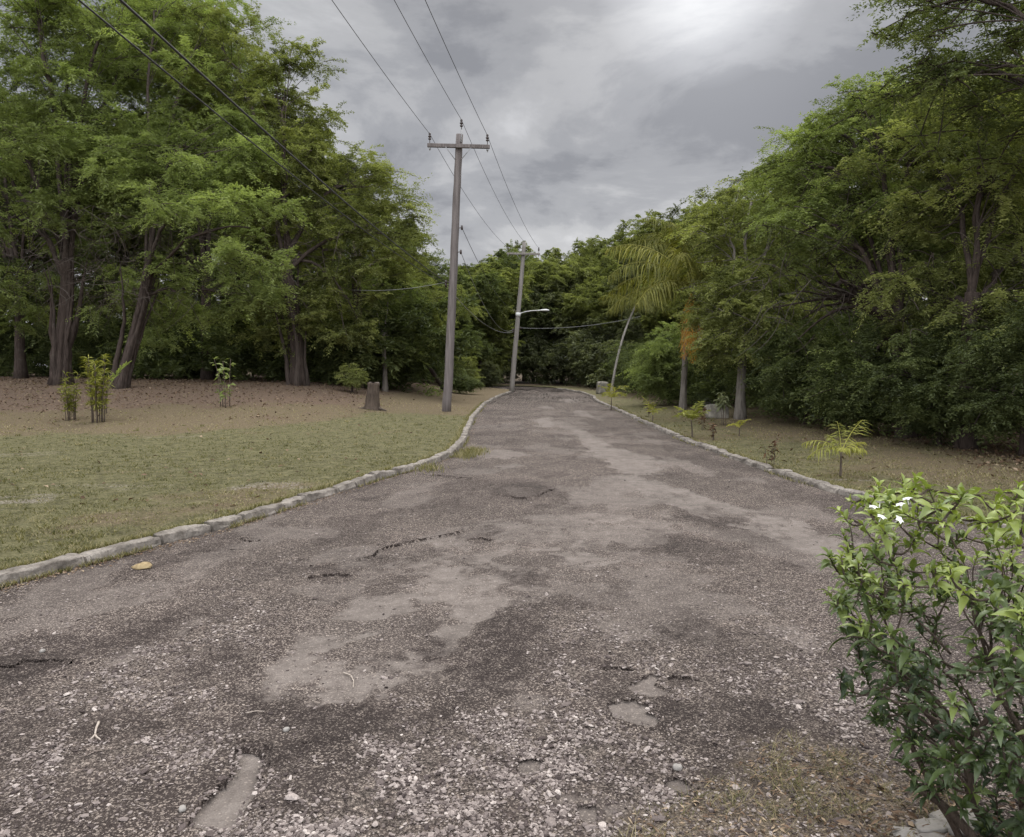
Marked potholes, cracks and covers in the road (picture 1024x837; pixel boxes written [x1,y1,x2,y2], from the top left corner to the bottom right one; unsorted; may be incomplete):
pothole [182,741,272,837]
pothole [598,695,667,731]
crack [0,657,77,671]
pothole [619,670,679,700]
pothole [508,754,549,779]
